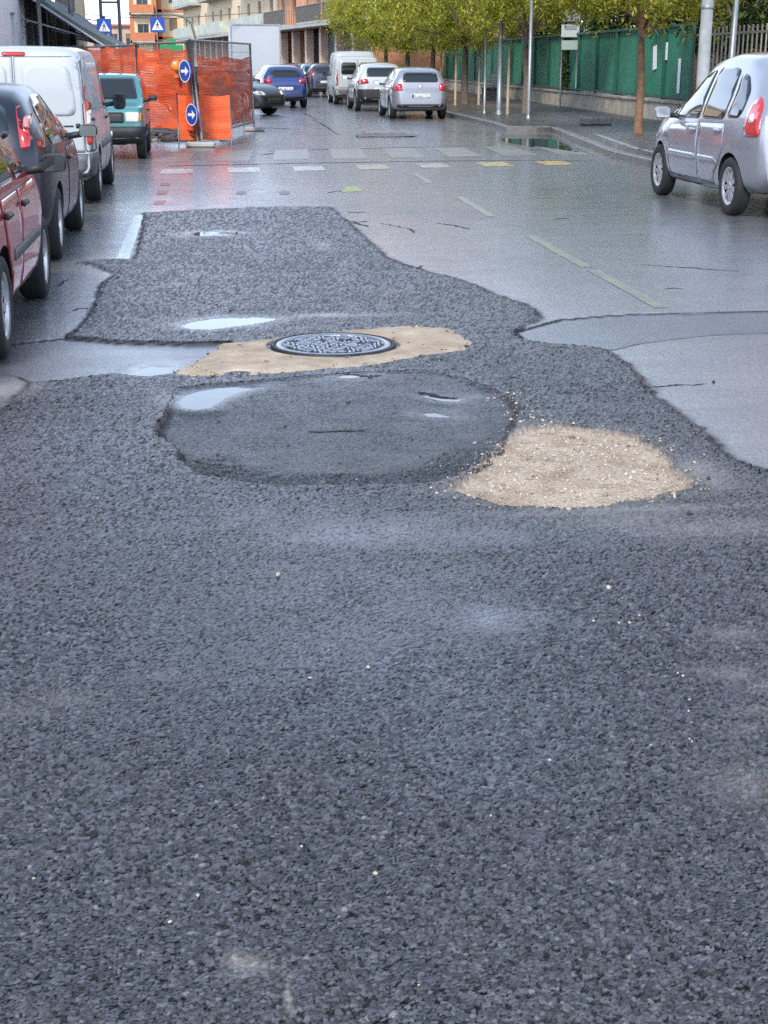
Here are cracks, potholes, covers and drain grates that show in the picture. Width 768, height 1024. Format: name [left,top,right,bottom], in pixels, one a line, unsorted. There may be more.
crack [343,212,415,233]
pothole [155,370,535,486]
manhole cover [271,332,396,357]
